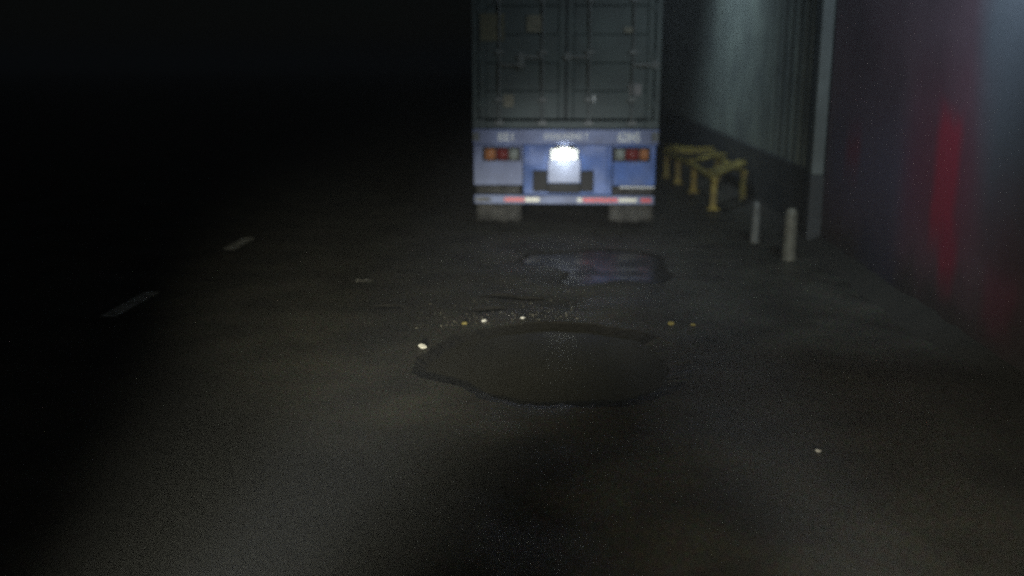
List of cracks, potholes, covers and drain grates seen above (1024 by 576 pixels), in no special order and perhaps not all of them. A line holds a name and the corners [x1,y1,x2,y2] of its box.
pothole [411,321,696,409]
pothole [518,248,674,285]
